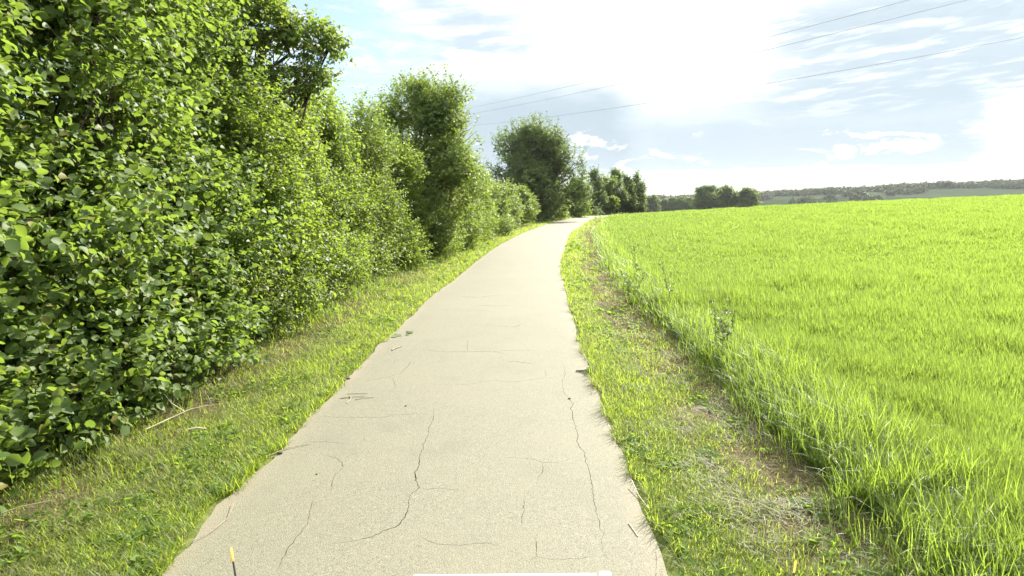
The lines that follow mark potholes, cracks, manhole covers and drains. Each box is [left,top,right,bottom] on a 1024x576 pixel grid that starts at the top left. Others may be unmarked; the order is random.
crack [473,365,604,562]
crack [329,410,460,545]
